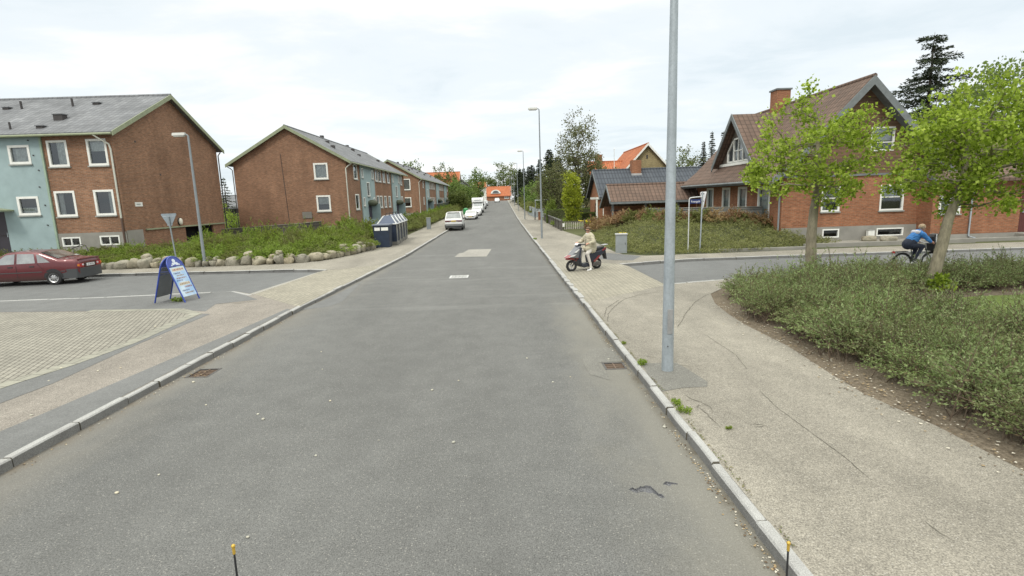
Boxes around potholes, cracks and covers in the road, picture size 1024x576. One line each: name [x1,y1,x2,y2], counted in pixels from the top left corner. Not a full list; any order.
drain grate [602,362,628,370]
drain grate [184,368,222,378]
